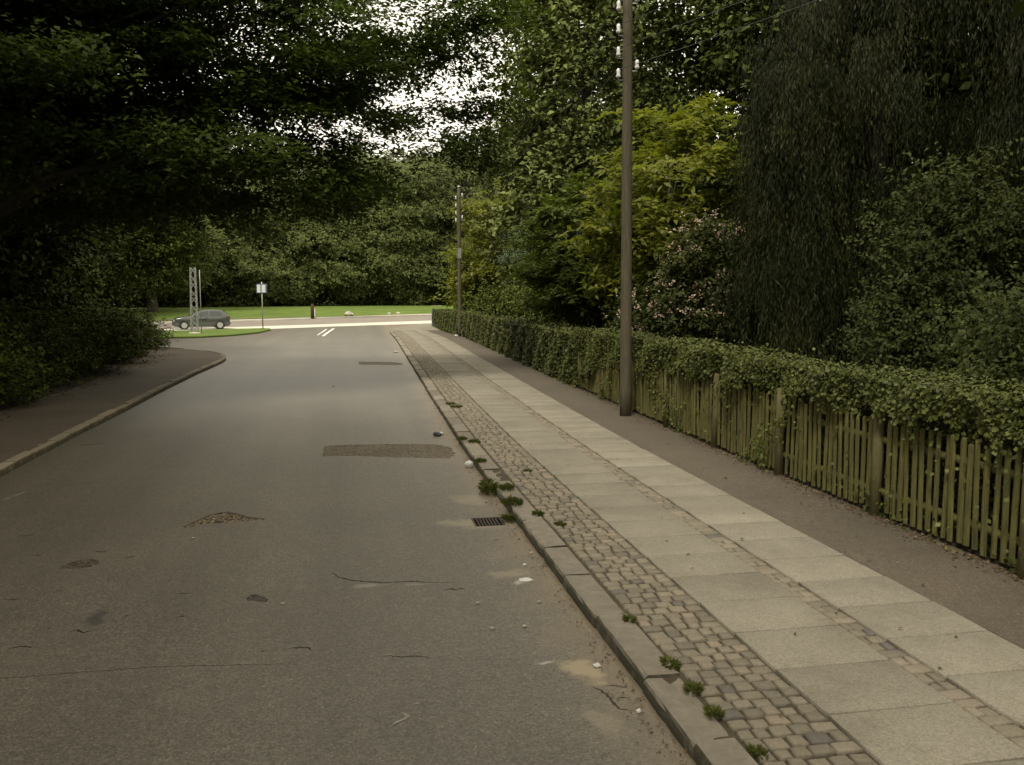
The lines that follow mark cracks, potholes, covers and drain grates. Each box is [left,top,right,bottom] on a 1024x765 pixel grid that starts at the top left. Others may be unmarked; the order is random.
drain grate [471,517,505,527]
crack [333,573,466,591]
pothole [183,512,266,528]
pothole [59,559,99,570]
crack [10,664,273,678]
pothole [246,594,268,602]
crack [589,685,630,711]
